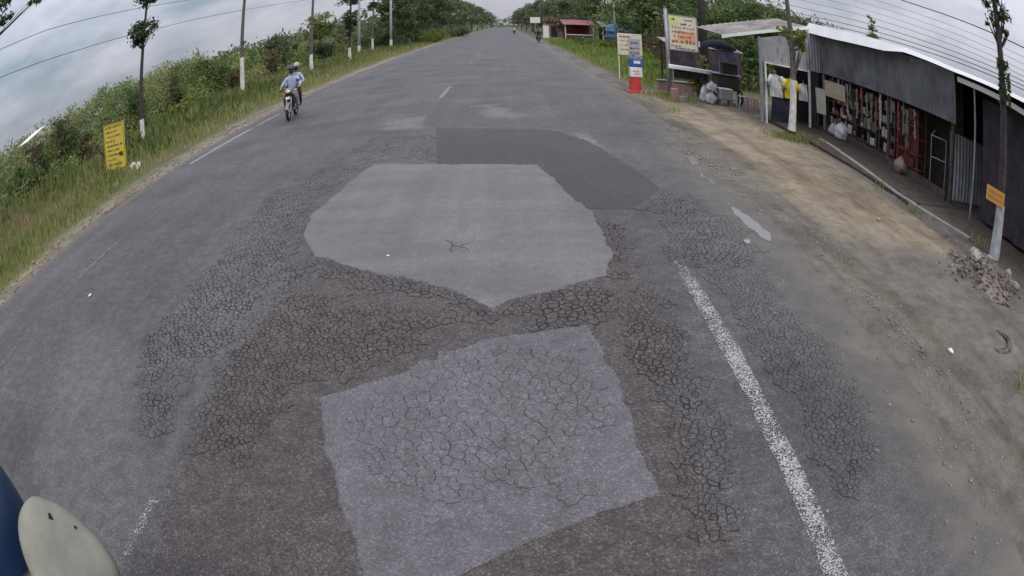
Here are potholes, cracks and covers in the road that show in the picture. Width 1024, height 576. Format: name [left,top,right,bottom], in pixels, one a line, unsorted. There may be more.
crack [133,134,887,544]
